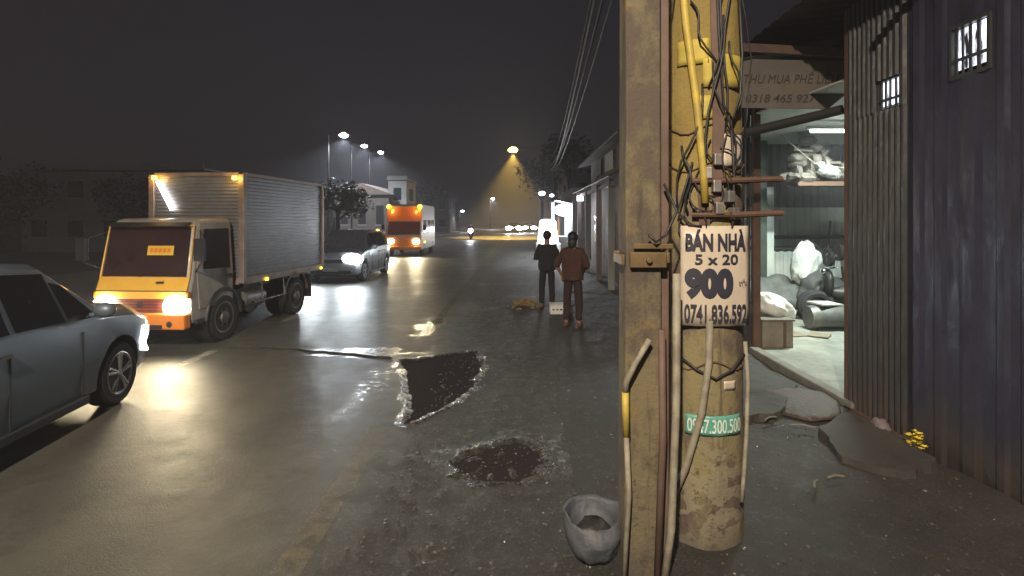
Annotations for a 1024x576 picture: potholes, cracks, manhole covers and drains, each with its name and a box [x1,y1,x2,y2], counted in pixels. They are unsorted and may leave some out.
crack [225,346,392,359]
pothole [390,350,490,427]
pothole [445,437,559,488]
